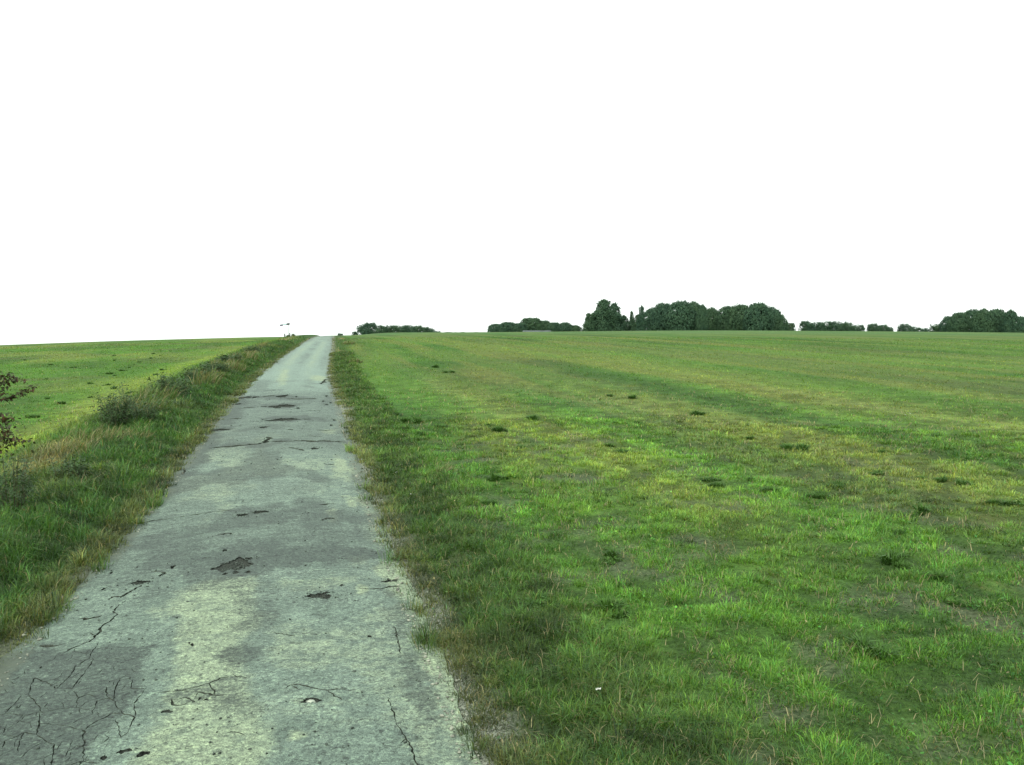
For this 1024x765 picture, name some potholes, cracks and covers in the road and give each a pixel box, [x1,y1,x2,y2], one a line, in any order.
pothole [210,557,257,575]
crack [388,698,418,765]
crack [0,571,237,765]
crack [214,430,341,451]
